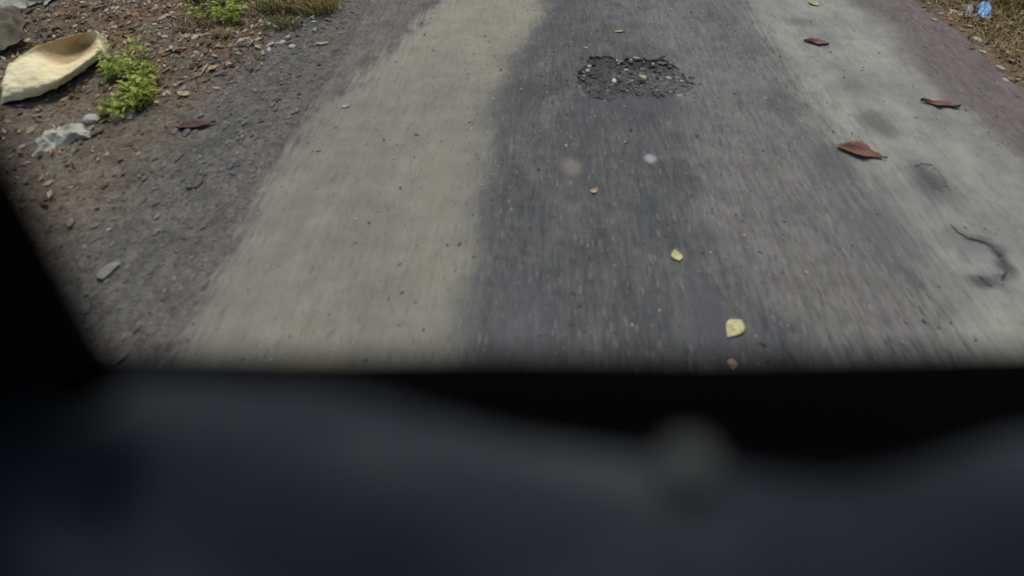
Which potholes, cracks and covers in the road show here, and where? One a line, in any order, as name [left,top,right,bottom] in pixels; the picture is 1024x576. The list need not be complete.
pothole [577,56,696,102]
pothole [914,163,951,193]
crack [951,225,1009,287]
